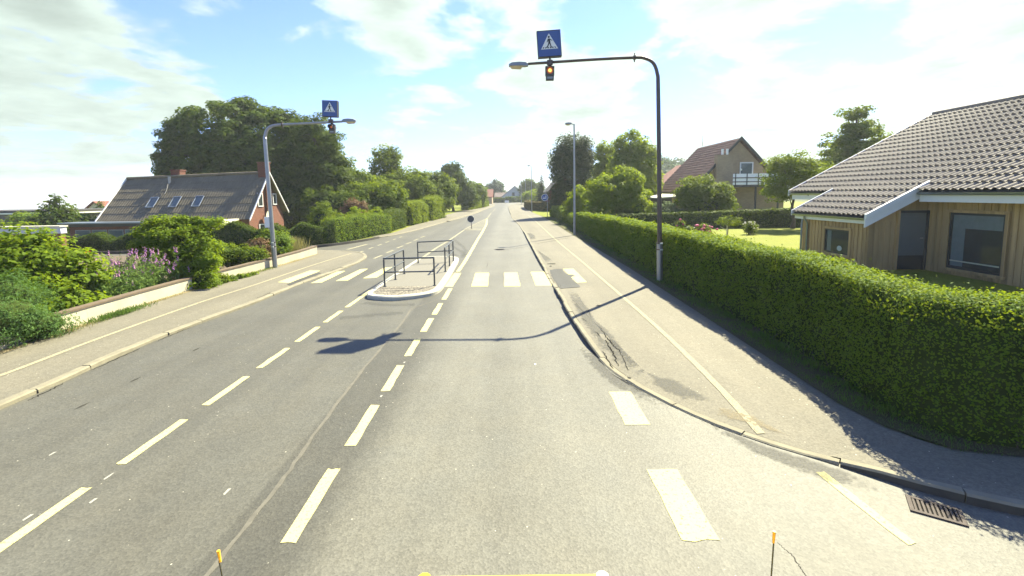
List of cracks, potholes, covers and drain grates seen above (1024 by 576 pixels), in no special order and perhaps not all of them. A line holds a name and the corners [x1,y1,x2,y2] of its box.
drain grate [905,494,969,528]
crack [596,328,629,370]
